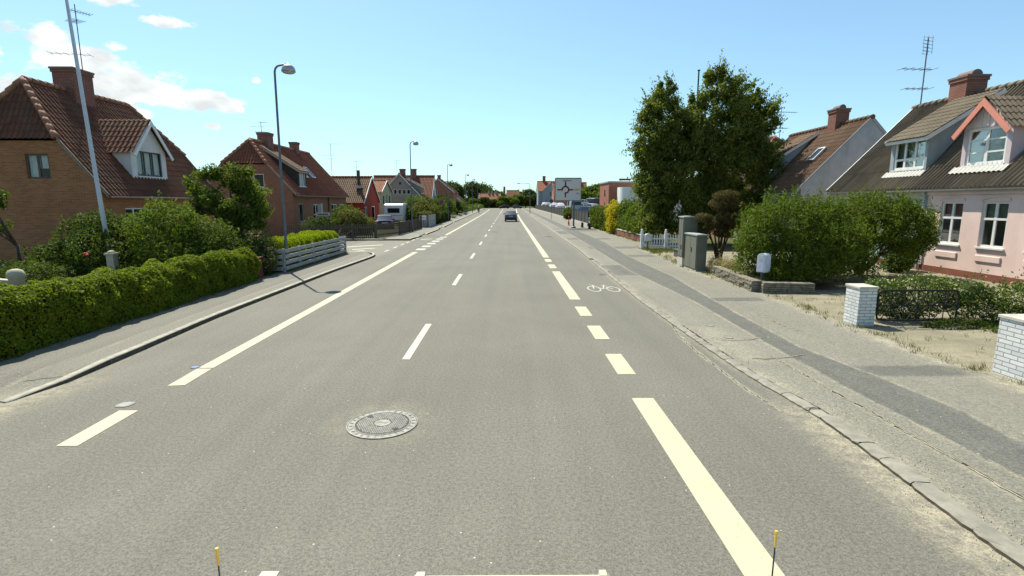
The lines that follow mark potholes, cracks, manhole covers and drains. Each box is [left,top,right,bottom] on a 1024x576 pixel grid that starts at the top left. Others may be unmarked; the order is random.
manhole cover [346,409,418,439]
